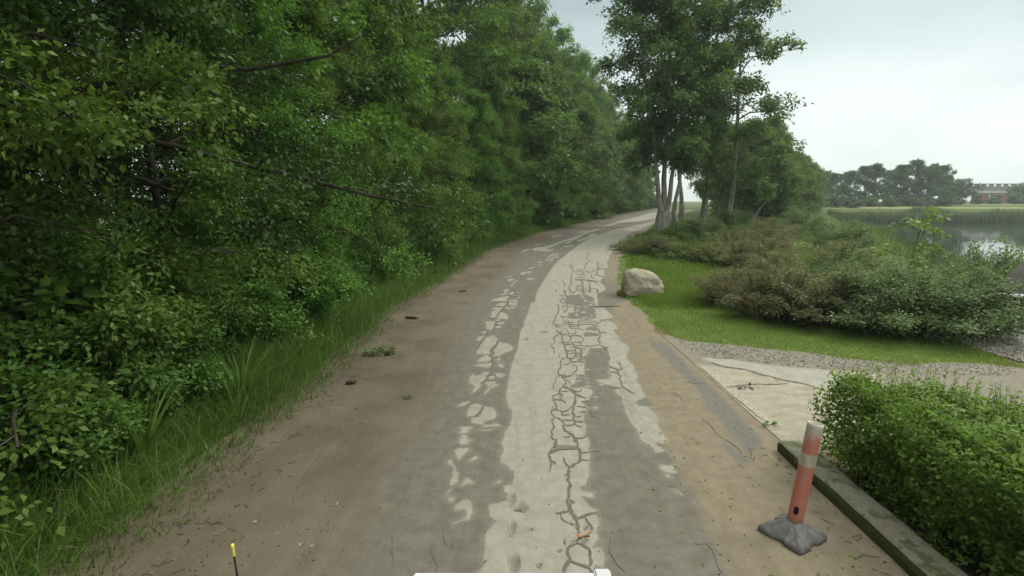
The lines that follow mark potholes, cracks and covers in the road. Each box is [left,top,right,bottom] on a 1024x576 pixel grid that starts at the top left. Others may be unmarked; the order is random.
crack [711,357,815,387]
crack [548,222,635,573]
